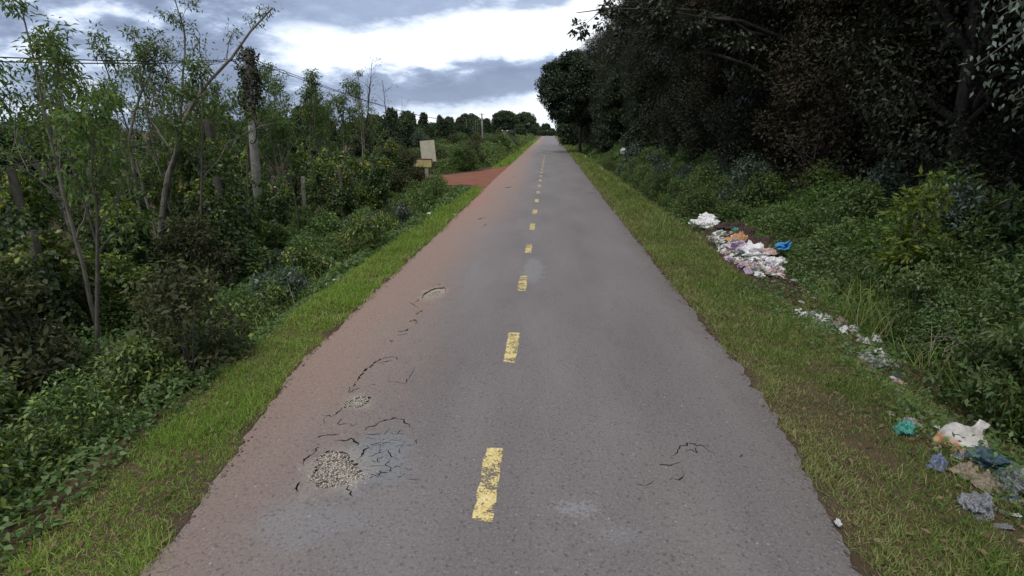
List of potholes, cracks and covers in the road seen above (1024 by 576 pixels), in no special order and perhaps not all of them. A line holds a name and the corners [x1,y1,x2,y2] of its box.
pothole [341,393,372,409]
pothole [422,287,446,299]
crack [637,442,743,486]
crack [295,284,440,497]
pothole [307,450,369,491]
